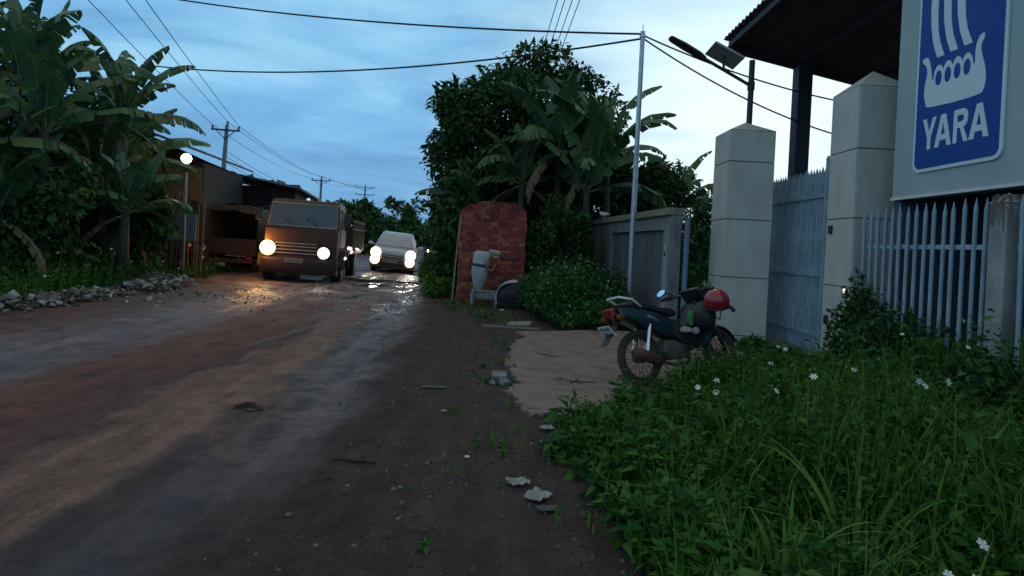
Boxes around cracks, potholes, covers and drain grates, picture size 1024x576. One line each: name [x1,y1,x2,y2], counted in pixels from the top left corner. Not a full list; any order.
pothole [233,402,264,412]
